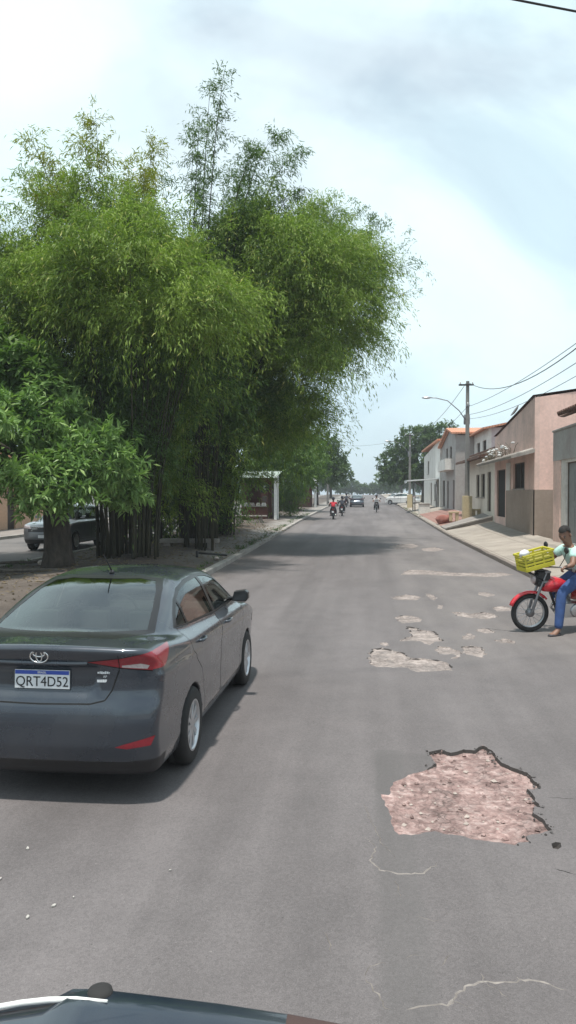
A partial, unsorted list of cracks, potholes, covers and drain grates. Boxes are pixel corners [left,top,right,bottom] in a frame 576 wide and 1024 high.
pothole [400,626,444,645]
pothole [461,645,487,658]
pothole [381,745,554,846]
pothole [395,615,422,624]
pothole [435,646,463,659]
crack [364,805,436,896]
crack [406,955,564,1010]
pothole [367,648,453,672]
